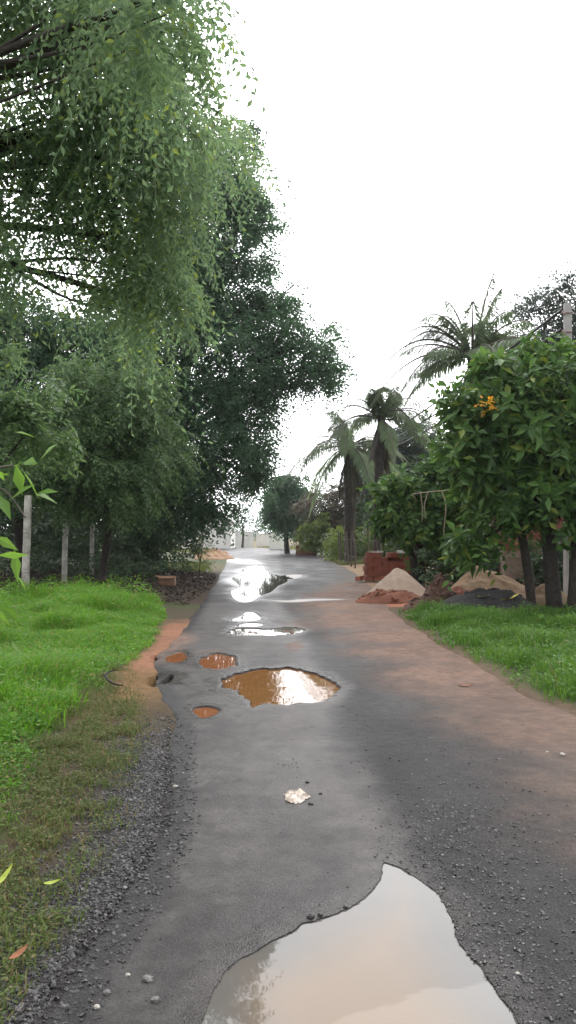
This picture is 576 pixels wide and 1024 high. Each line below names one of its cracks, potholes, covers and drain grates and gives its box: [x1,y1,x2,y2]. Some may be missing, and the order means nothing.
pothole [197,652,238,670]
pothole [163,651,189,662]
pothole [201,862,520,1024]
pothole [192,705,220,718]
pothole [220,667,341,708]
pothole [226,627,306,636]
